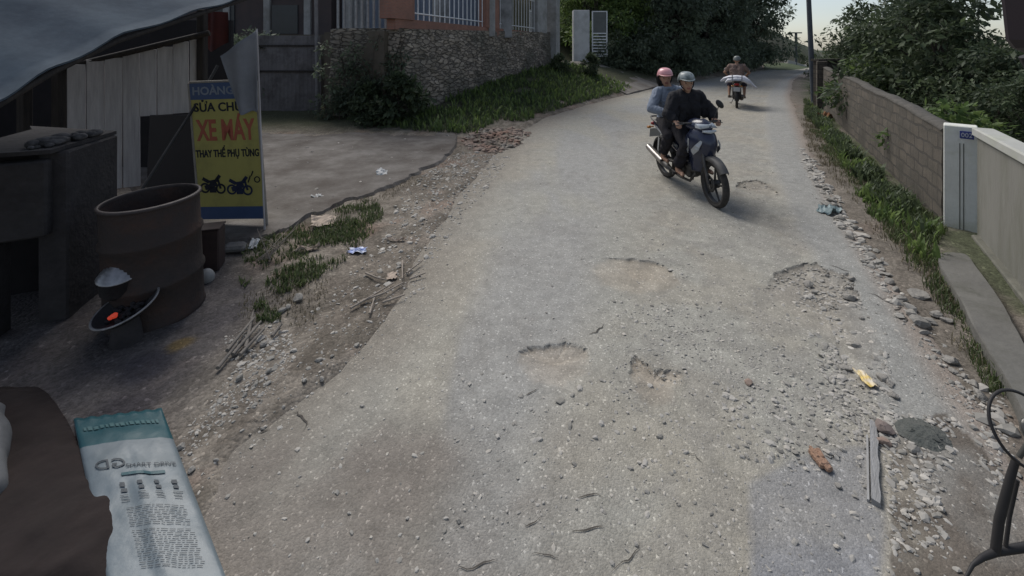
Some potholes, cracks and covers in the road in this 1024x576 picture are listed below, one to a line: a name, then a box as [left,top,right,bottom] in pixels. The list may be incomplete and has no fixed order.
pothole [625,353,688,417]
crack [460,559,498,570]
pothole [583,257,683,299]
pothole [733,179,779,200]
pothole [759,261,890,385]
pothole [512,340,598,396]
